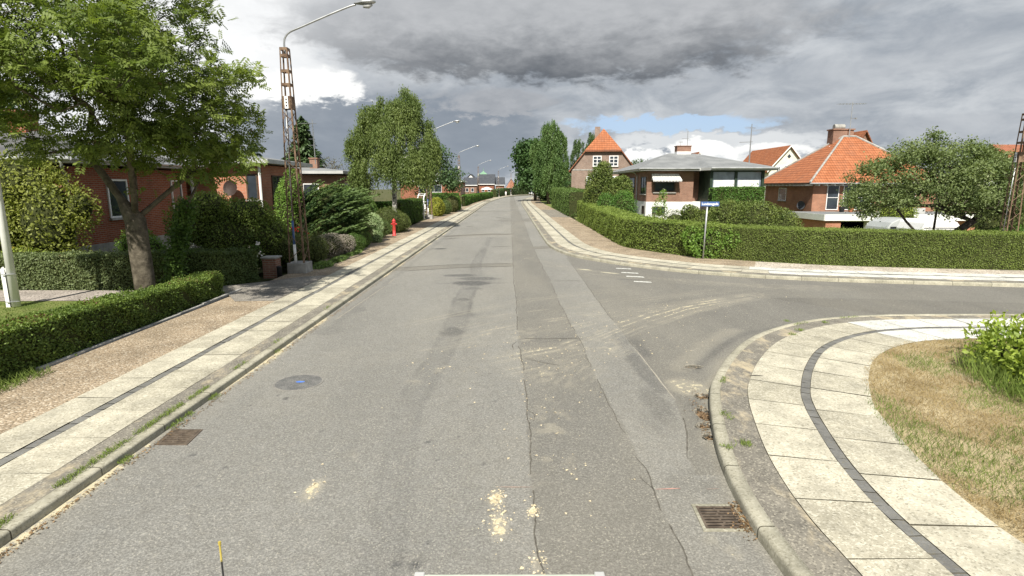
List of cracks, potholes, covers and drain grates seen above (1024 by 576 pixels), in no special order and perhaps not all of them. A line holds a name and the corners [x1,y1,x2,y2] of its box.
drain grate [155,429,203,445]
crack [635,456,694,576]
crack [335,206,622,574]
manhole cover [273,374,324,391]
drain grate [691,504,751,532]
